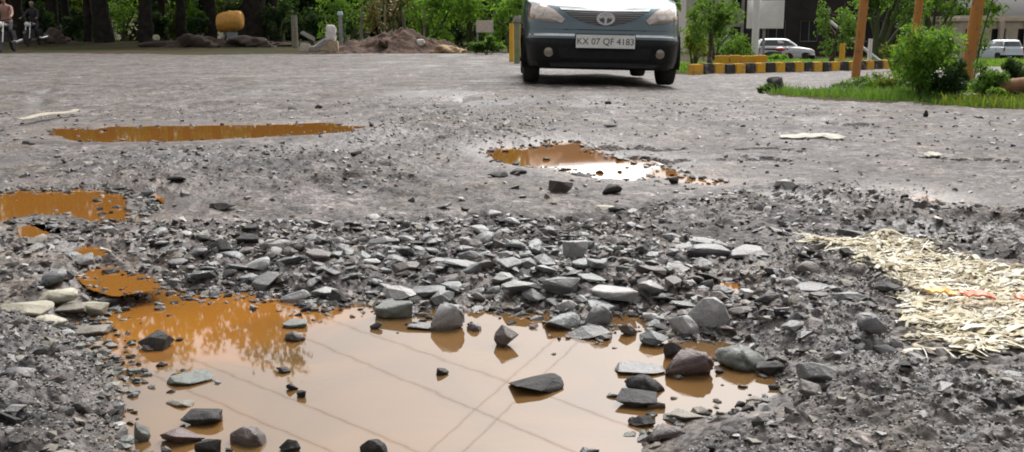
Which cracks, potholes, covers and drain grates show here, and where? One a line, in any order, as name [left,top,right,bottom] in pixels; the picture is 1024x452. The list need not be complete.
pothole [472,138,740,186]
pothole [53,272,799,452]
pothole [856,212,1024,243]
pothole [38,120,378,142]
pothole [751,187,853,205]
pothole [71,258,161,298]
pothole [0,183,170,237]
